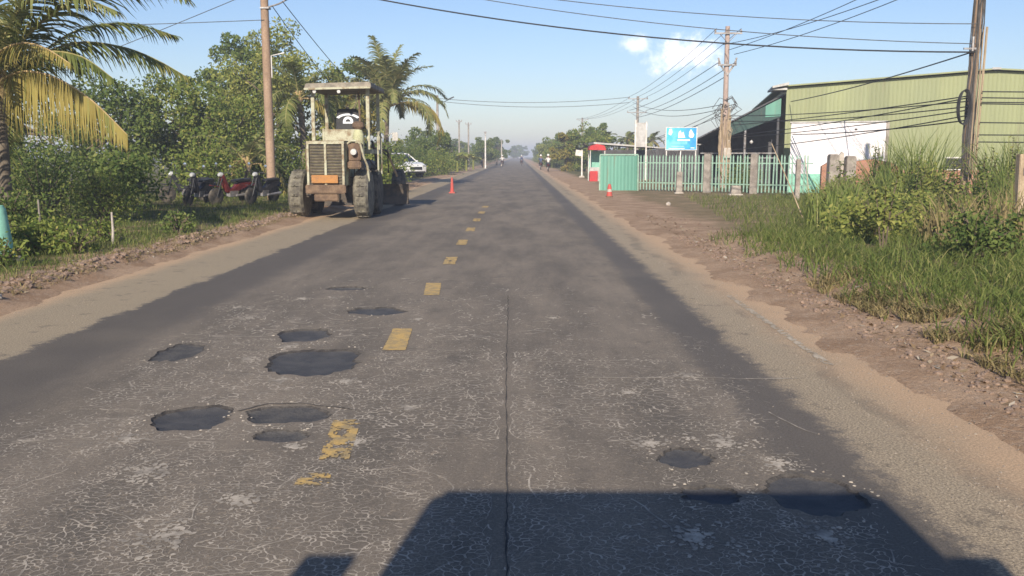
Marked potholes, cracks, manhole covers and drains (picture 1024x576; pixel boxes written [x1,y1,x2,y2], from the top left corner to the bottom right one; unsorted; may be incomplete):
pothole [646,444,727,471]
crack [0,272,509,576]
pothole [129,403,253,432]
pothole [143,341,210,363]
pothole [223,400,339,426]
pothole [253,343,388,379]
pothole [666,481,758,506]
pothole [745,466,880,529]
pothole [242,428,310,443]
pothole [271,325,333,346]
pothole [344,307,409,318]
